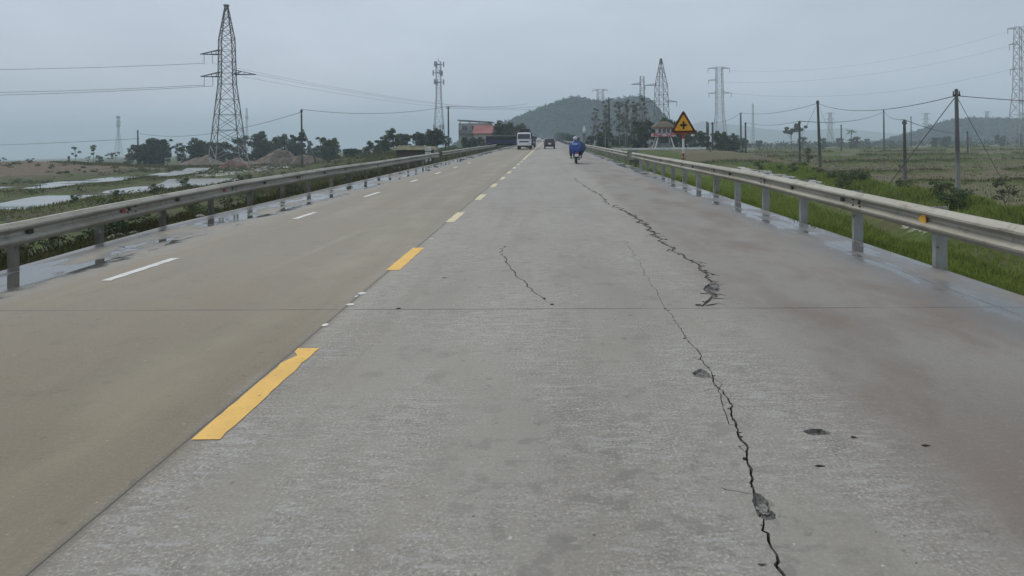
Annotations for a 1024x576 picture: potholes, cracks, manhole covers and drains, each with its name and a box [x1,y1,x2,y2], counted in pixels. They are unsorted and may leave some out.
crack [499,246,547,302]
crack [573,178,786,576]
pothole [692,369,713,378]
